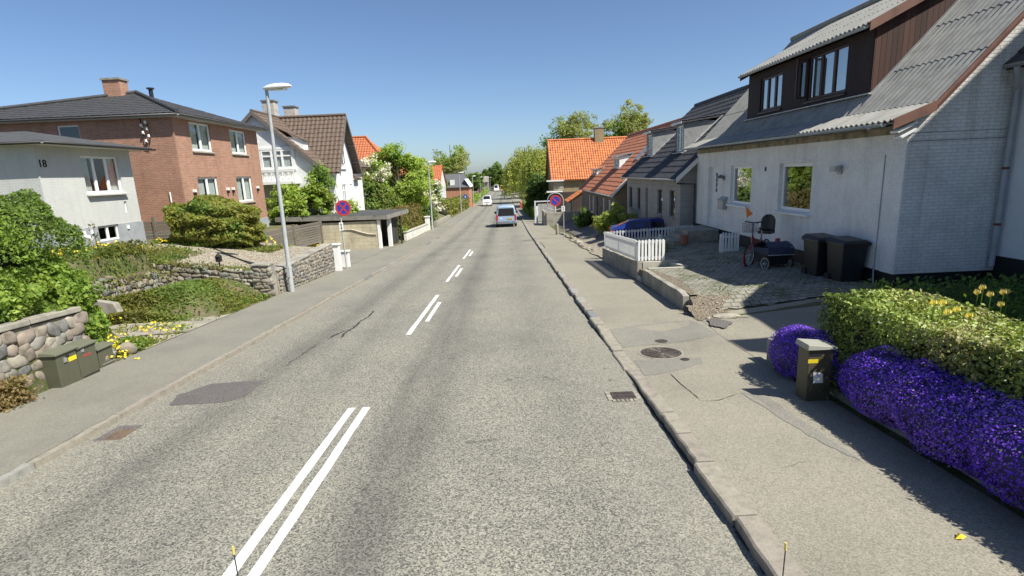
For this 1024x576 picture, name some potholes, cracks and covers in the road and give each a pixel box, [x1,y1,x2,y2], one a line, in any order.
drain grate [605,390,642,402]
manhole cover [638,346,684,359]
crack [287,310,375,365]
